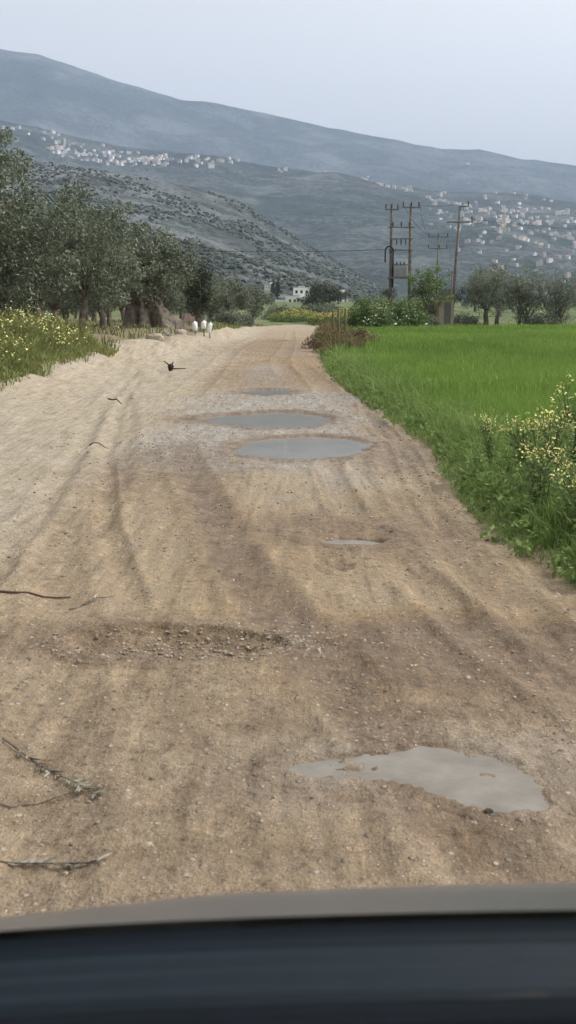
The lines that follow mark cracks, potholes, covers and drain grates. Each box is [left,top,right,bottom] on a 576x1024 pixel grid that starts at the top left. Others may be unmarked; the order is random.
pothole [249,734,576,828]
pothole [226,388,309,397]
pothole [49,619,304,670]
pothole [217,433,388,462]
pothole [172,409,346,430]
